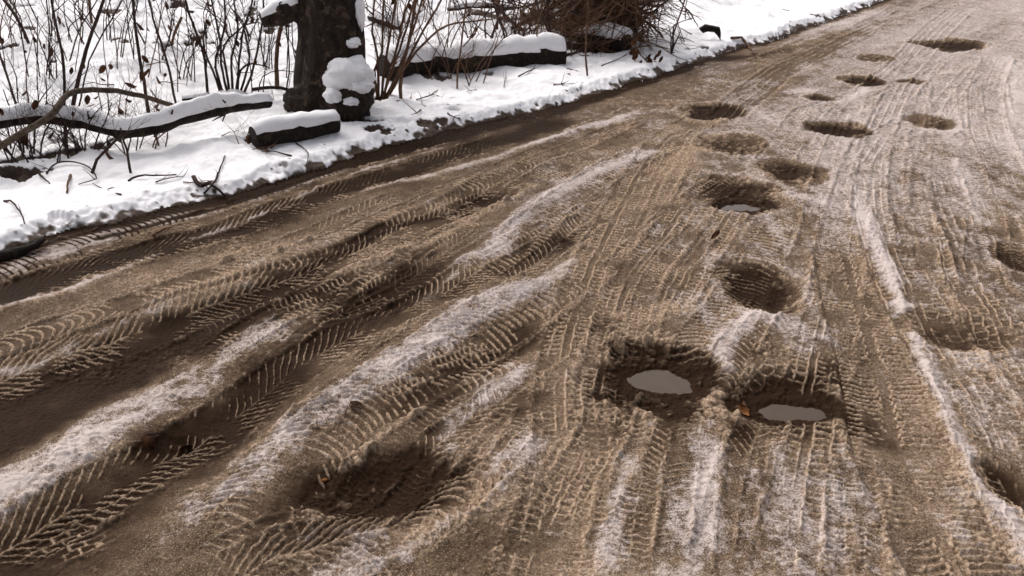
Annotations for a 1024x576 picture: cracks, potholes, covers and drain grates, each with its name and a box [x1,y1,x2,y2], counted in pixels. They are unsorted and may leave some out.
pothole [714,365,840,431]
pothole [269,444,497,531]
pothole [856,53,897,63]
pothole [706,257,808,316]
pothole [752,157,836,188]
pothole [801,120,876,139]
pothole [802,93,837,102]
pothole [688,172,793,216]
pothole [693,132,772,157]
pothole [676,101,749,122]
pothole [902,112,961,131]
pothole [835,73,889,87]
